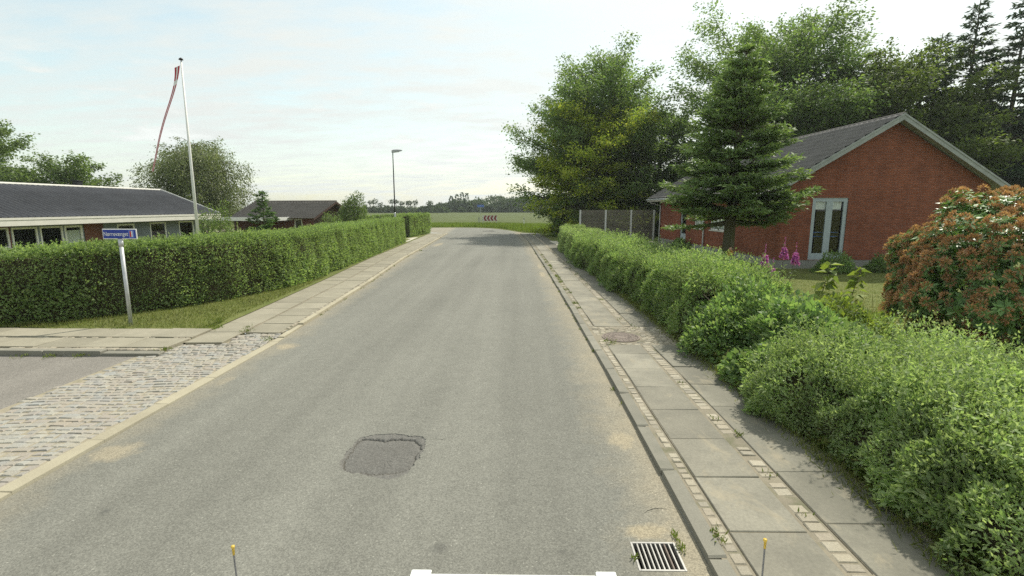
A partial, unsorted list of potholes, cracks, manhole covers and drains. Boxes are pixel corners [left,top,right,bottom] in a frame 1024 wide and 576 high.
drain grate [630,542,688,572]
manhole cover [602,332,640,342]
